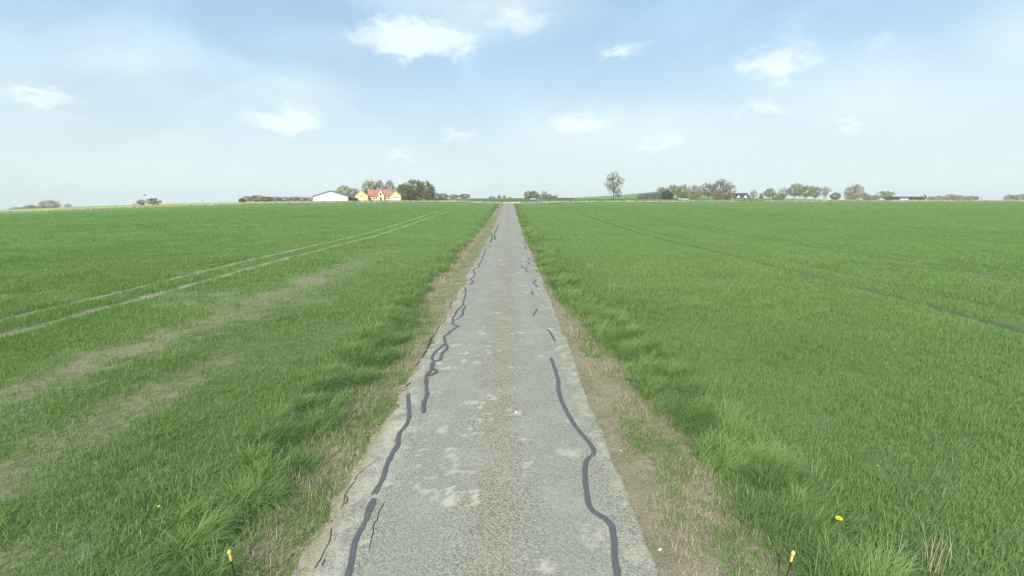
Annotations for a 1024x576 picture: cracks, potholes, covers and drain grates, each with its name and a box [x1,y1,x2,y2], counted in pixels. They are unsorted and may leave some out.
crack [315,462,384,568]
crack [403,302,452,391]
